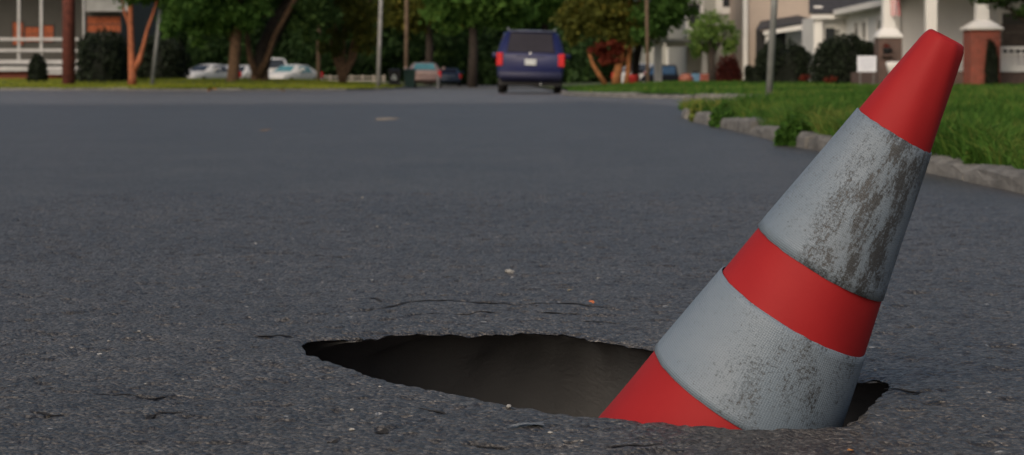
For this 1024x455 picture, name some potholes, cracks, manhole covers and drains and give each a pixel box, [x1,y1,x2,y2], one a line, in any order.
crack [100,394,181,419]
crack [367,298,616,324]
pothole [302,334,890,427]
